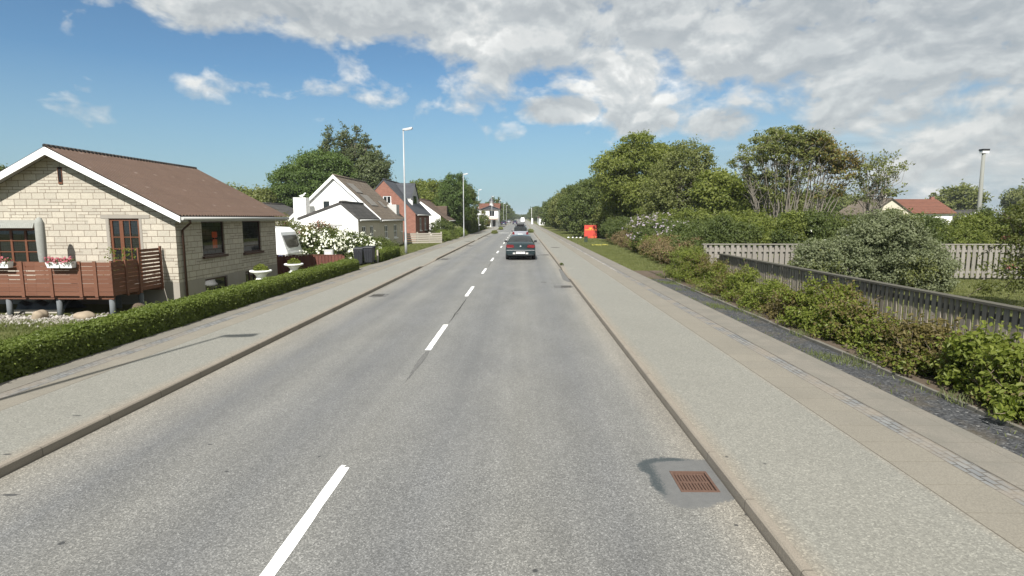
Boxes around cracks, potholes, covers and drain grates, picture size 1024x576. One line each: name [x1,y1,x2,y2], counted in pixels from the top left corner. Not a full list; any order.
drain grate [669,471,720,492]
